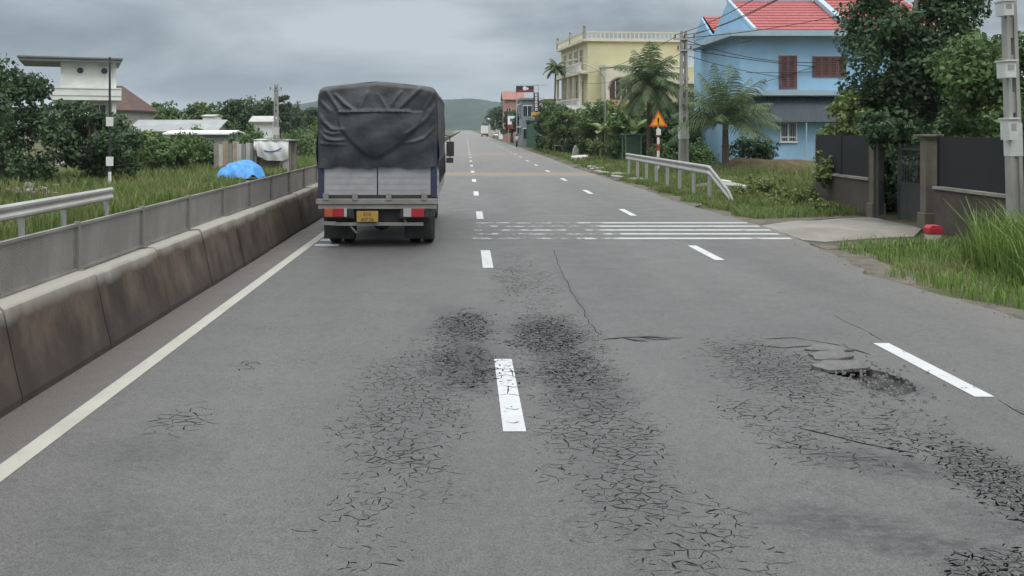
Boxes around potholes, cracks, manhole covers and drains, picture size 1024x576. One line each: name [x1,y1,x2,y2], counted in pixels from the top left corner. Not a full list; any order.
crack [944,544,1024,576]
crack [292,254,797,576]
crack [139,400,218,442]
pothole [824,369,917,395]
crack [682,315,1024,524]
